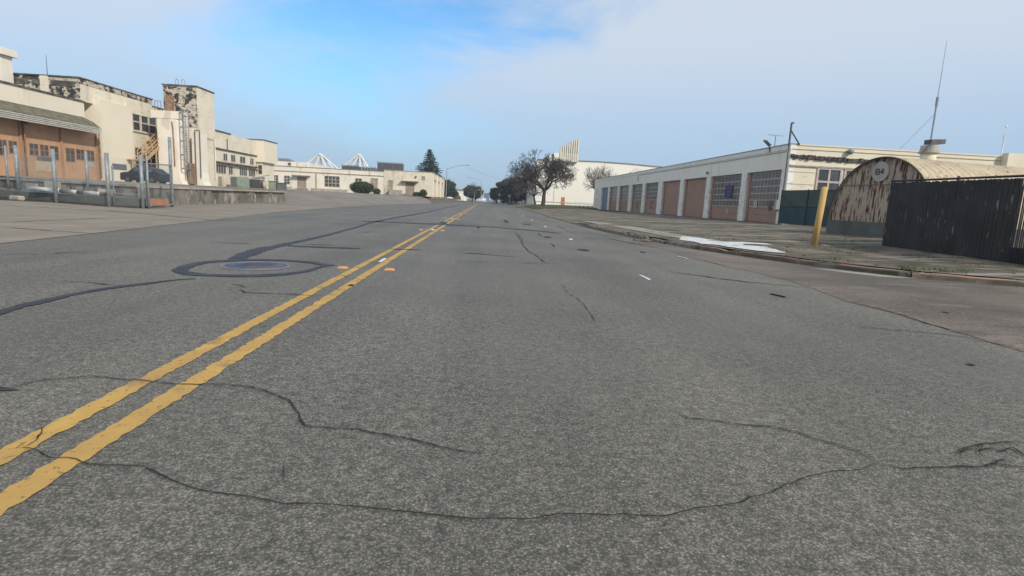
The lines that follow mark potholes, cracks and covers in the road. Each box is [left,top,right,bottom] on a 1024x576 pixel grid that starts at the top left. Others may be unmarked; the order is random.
crack [674,410,878,462]
manhole cover [219,261,291,270]
crack [882,441,1024,469]
crack [2,376,482,454]
crack [11,427,875,519]
